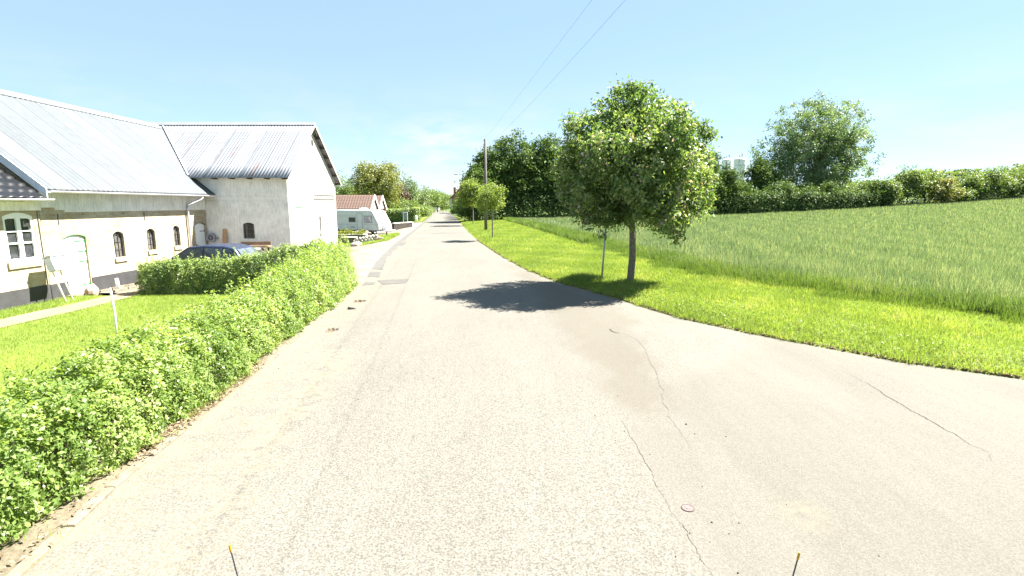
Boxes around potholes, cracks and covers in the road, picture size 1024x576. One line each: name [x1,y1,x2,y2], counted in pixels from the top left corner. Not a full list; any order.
crack [610,329,689,446]
crack [623,422,713,575]
crack [854,376,984,450]
